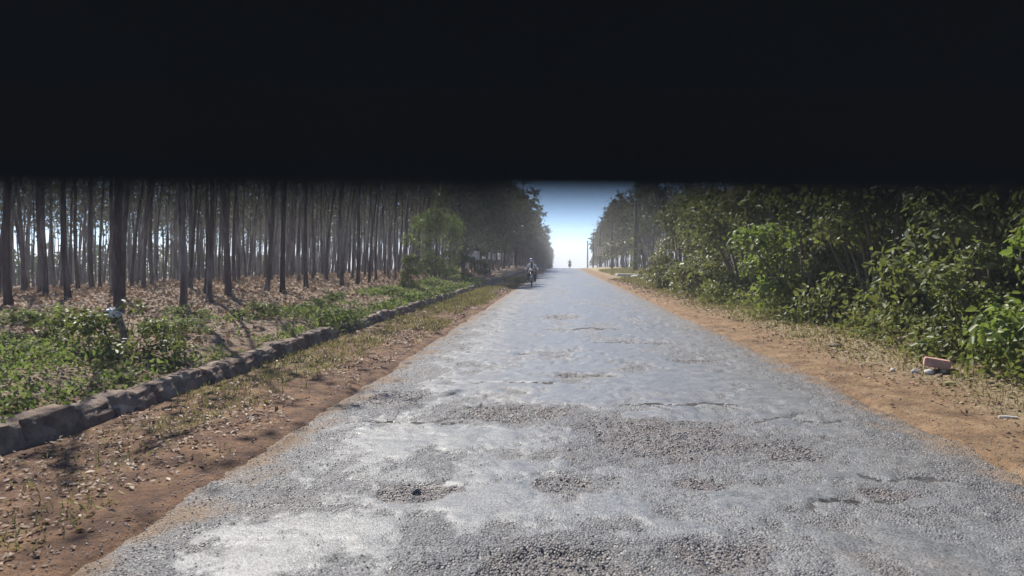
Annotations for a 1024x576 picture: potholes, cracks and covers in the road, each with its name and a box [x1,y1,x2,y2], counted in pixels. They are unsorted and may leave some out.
crack [573,327,671,345]
crack [620,402,852,424]
pothole [531,477,596,494]
pothole [373,485,464,503]
crack [857,474,966,484]
